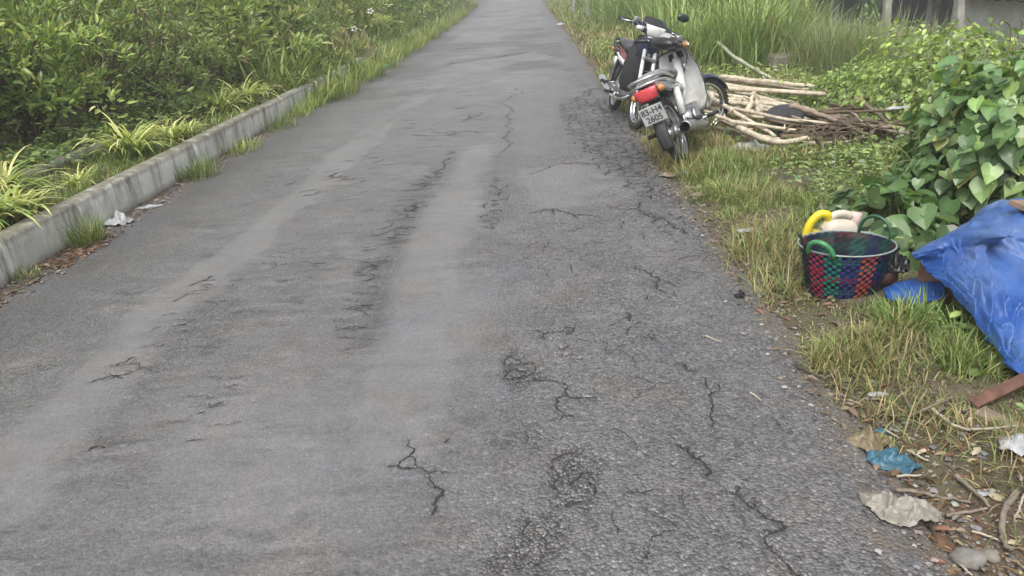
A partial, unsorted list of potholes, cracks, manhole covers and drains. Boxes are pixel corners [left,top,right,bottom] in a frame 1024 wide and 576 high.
crack [92,276,243,382]
crack [551,443,800,576]
crack [503,352,593,443]
crack [528,88,721,444]
crack [88,376,243,450]
crack [269,107,483,350]
crack [388,439,449,515]
